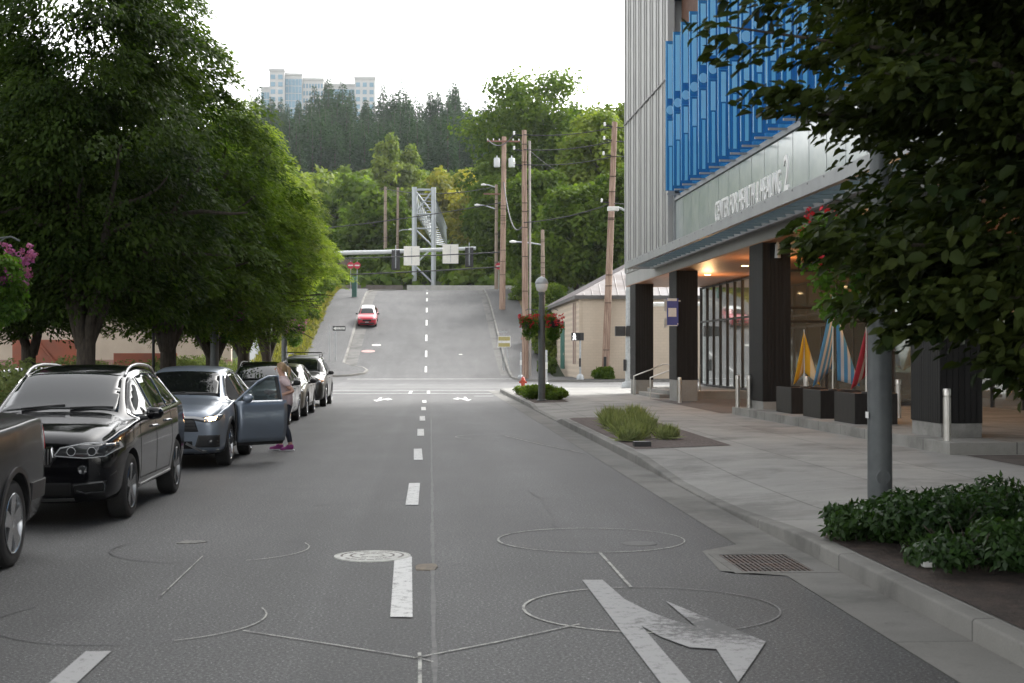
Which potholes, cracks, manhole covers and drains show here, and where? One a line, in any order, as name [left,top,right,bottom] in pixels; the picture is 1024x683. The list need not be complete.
manhole cover [334,550,411,562]
drain grate [708,553,843,611]
